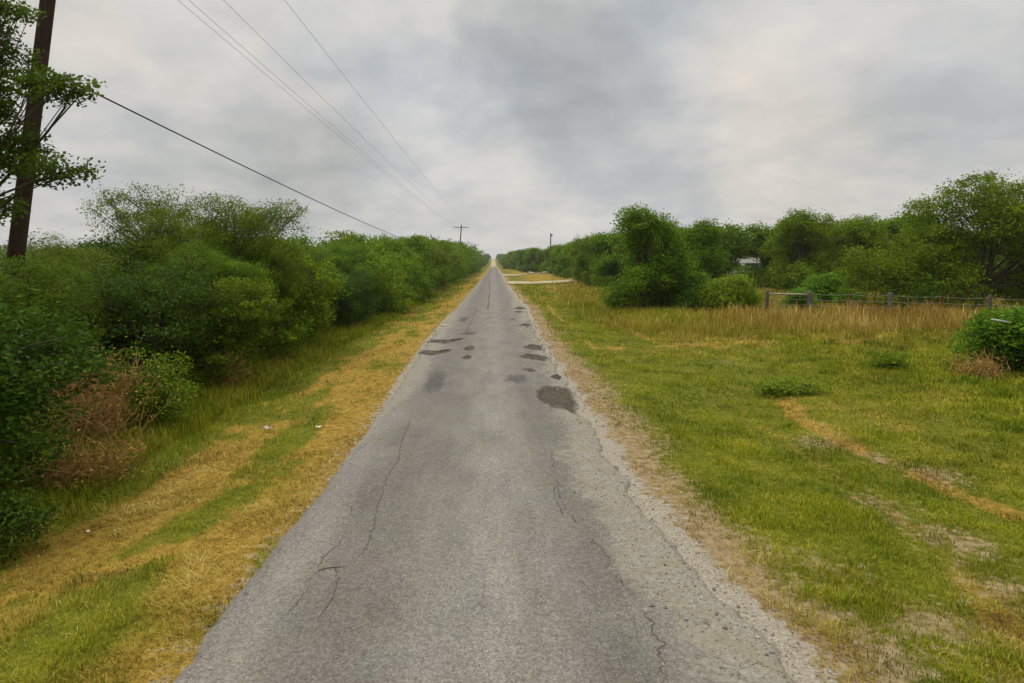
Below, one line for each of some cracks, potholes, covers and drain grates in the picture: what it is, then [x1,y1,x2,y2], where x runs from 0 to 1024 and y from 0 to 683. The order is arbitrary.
crack [550,454,668,683]
crack [356,420,411,558]
crack [283,506,352,616]
